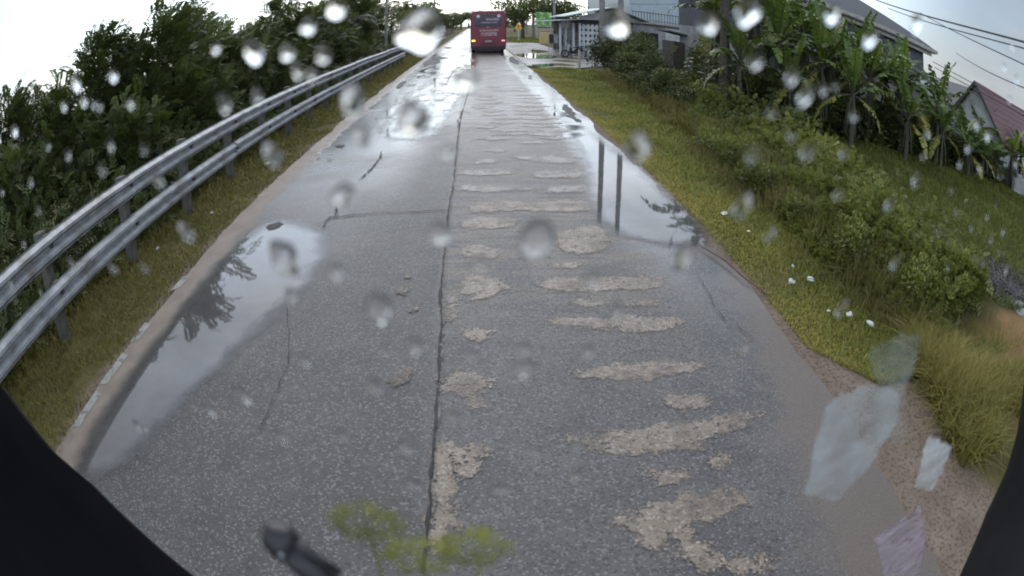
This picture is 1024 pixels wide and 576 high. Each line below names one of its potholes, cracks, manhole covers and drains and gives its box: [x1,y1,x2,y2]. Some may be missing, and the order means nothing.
crack [258,308,290,429]
pothole [567,356,721,385]
pothole [550,409,767,460]
pothole [412,428,464,555]
pothole [454,185,539,193]
pothole [466,201,536,213]
pothole [545,184,589,194]
pothole [432,368,498,397]
pothole [533,274,668,294]
crack [322,206,450,229]
pothole [512,154,583,164]
